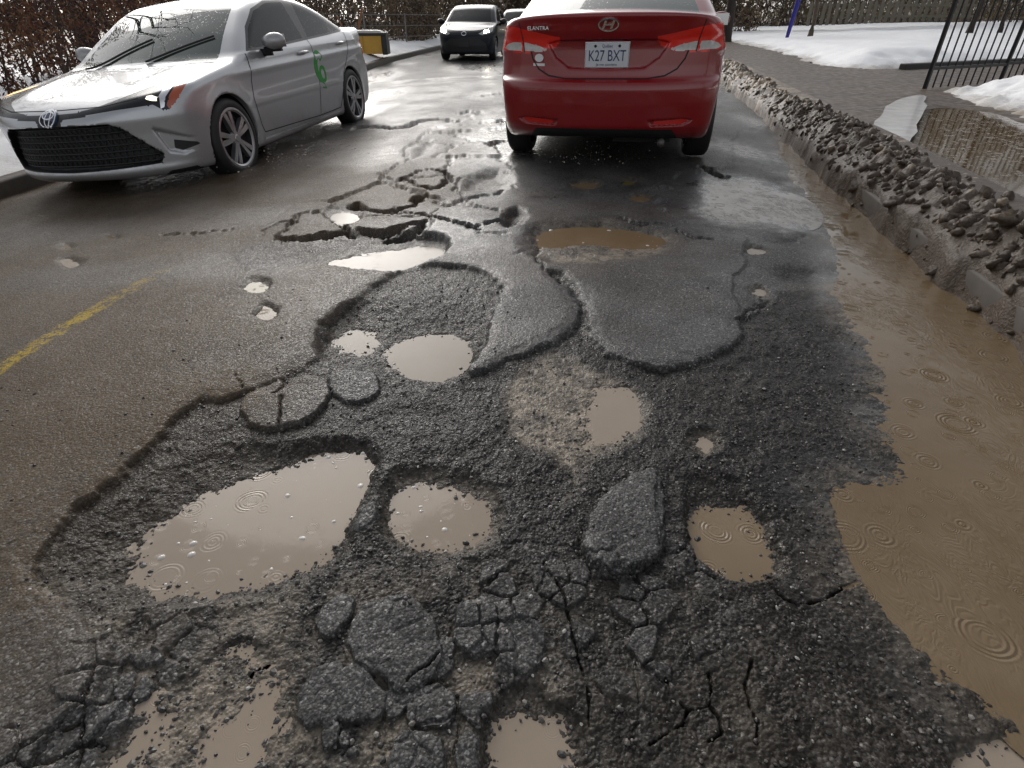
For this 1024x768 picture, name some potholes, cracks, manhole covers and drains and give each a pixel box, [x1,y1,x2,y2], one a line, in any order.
pothole [90,628,303,768]
pothole [497,348,658,514]
pothole [251,298,282,321]
pothole [476,675,591,768]
crack [695,165,732,179]
crack [742,658,761,746]
crack [554,580,592,728]
pothole [372,461,511,567]
crack [733,298,774,324]
pothole [237,274,274,294]
pothole [681,464,791,584]
crack [405,649,441,683]
